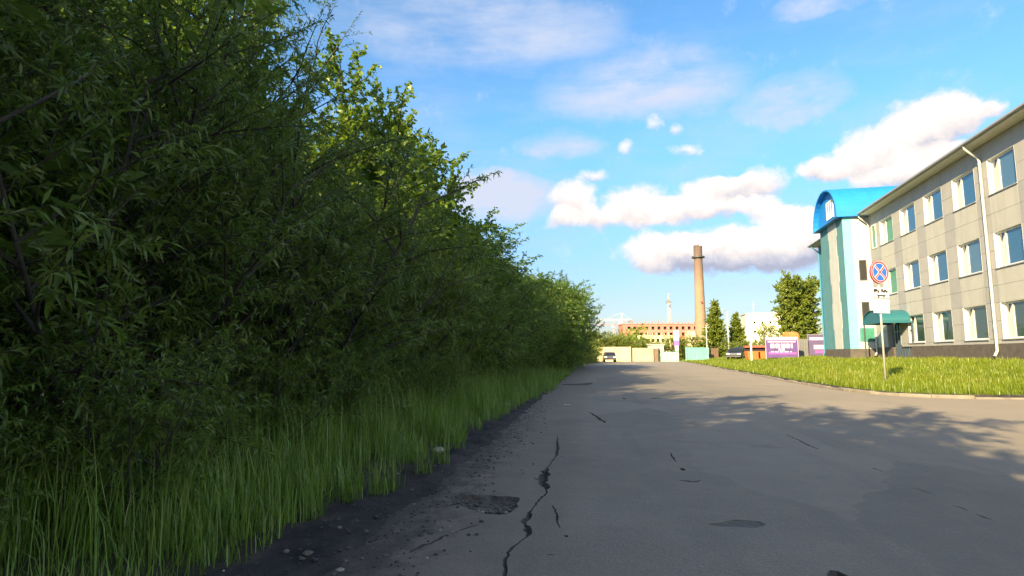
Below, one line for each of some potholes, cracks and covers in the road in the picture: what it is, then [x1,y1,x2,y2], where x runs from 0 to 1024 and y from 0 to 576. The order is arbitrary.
pothole [449,495,520,515]
crack [502,436,563,576]
pothole [702,520,766,528]
